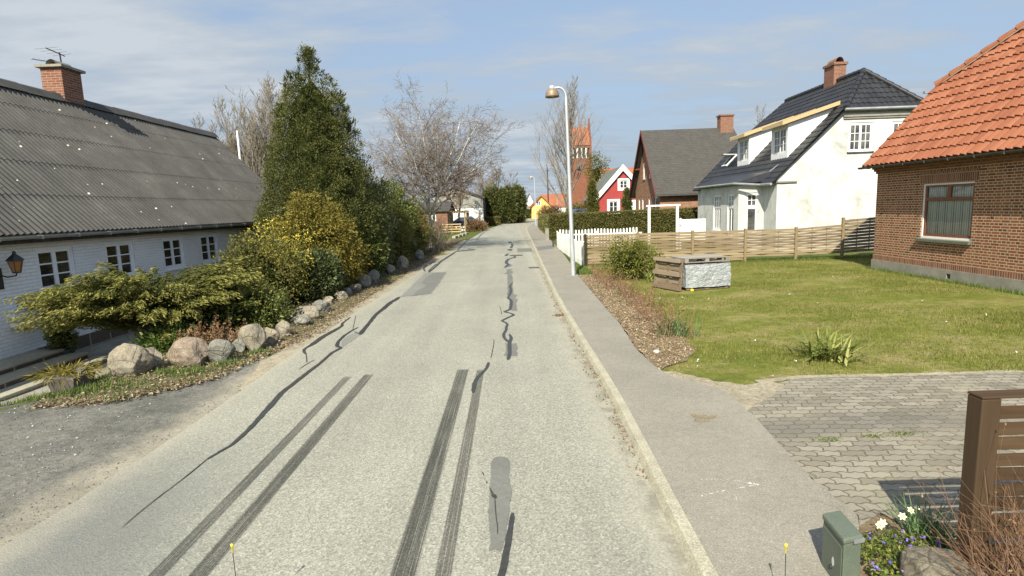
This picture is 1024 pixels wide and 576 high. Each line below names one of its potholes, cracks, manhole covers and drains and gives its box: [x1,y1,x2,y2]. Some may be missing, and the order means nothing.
crack [482,472,498,534]
